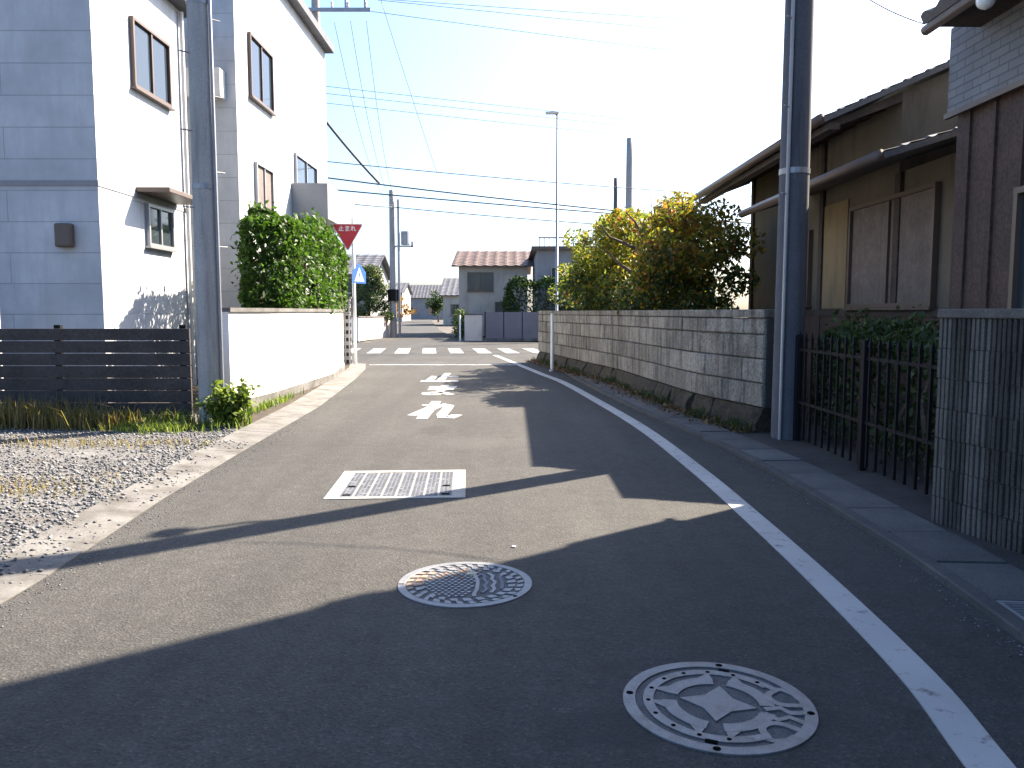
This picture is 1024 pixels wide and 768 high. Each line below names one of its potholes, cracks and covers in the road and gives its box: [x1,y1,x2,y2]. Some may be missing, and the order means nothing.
manhole cover [623,662,819,756]
manhole cover [397,562,532,608]
drain grate [995,600,1024,620]
